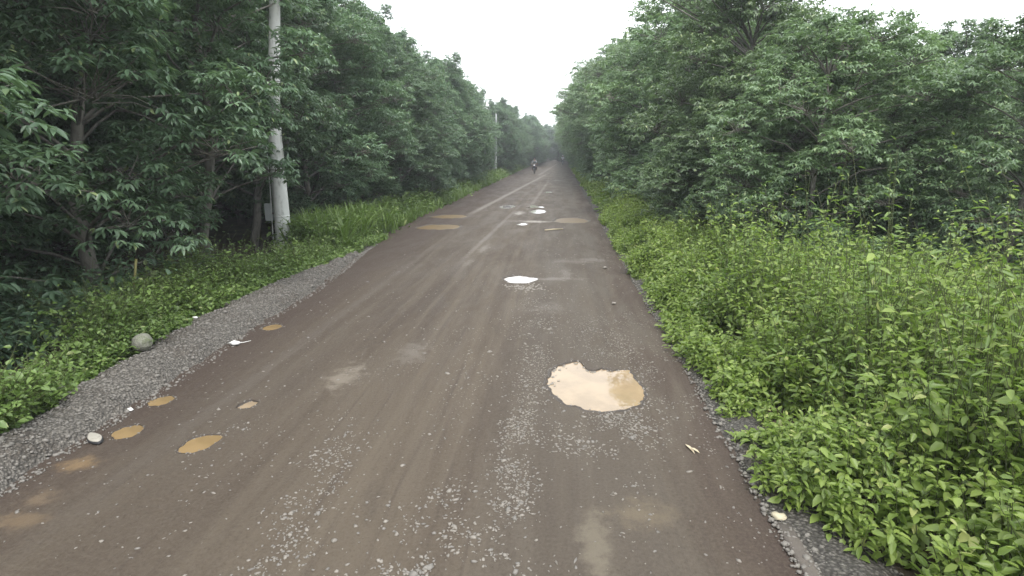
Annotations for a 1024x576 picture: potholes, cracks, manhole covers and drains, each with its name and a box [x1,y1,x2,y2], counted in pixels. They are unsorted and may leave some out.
pothole [230,399,259,410]
pothole [543,360,650,414]
pothole [501,275,546,293]
pothole [108,423,146,440]
pothole [145,395,177,408]
pothole [175,434,227,456]
pothole [260,323,285,331]
